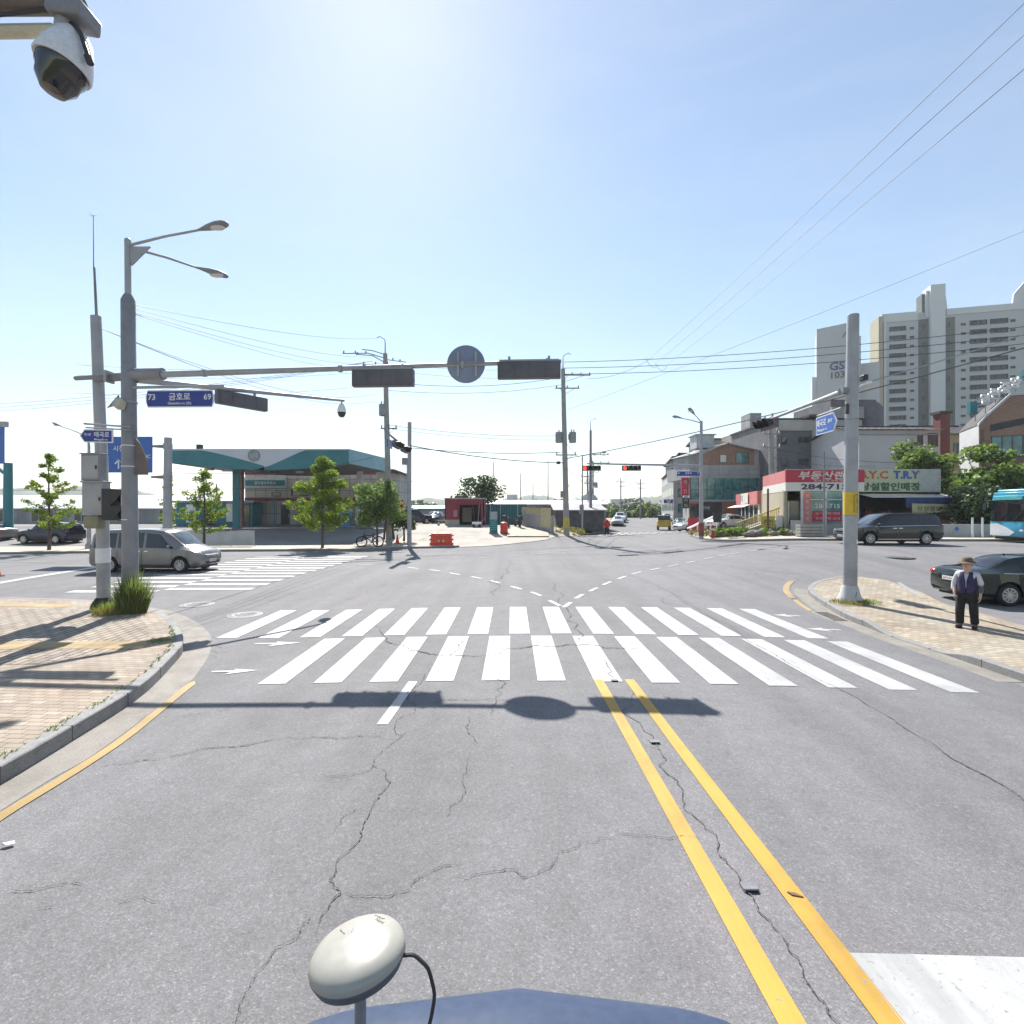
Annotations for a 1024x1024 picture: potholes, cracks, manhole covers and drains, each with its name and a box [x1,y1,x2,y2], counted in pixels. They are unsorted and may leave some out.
crack [379,583,840,1024]
crack [233,661,682,1024]
crack [94,735,381,766]
